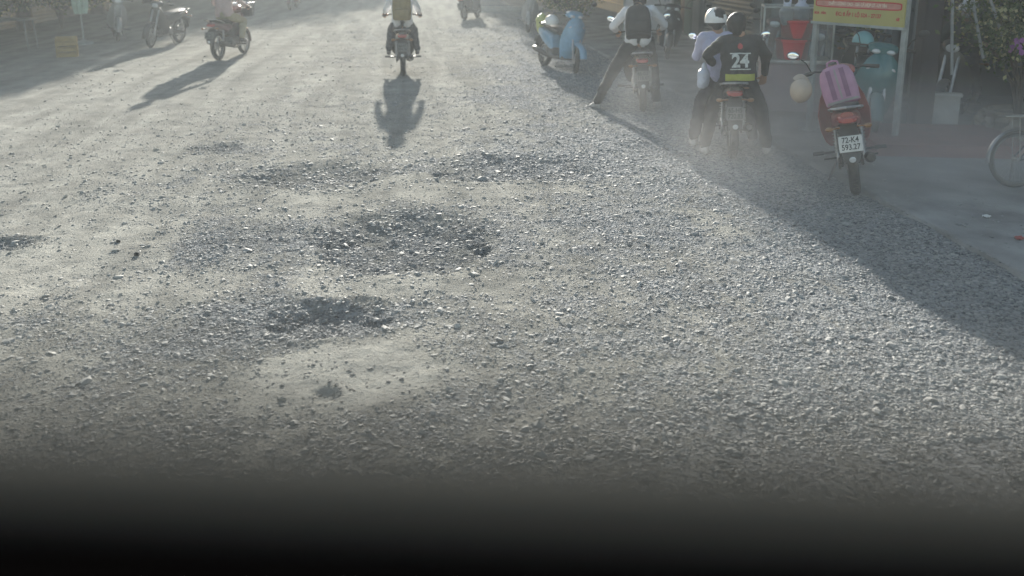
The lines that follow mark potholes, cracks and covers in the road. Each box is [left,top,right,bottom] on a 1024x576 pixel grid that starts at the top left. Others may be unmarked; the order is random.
pothole [256,295,407,341]
pothole [180,142,249,154]
pothole [222,158,394,191]
pothole [0,235,51,252]
pothole [294,202,506,278]
pothole [416,152,606,184]
